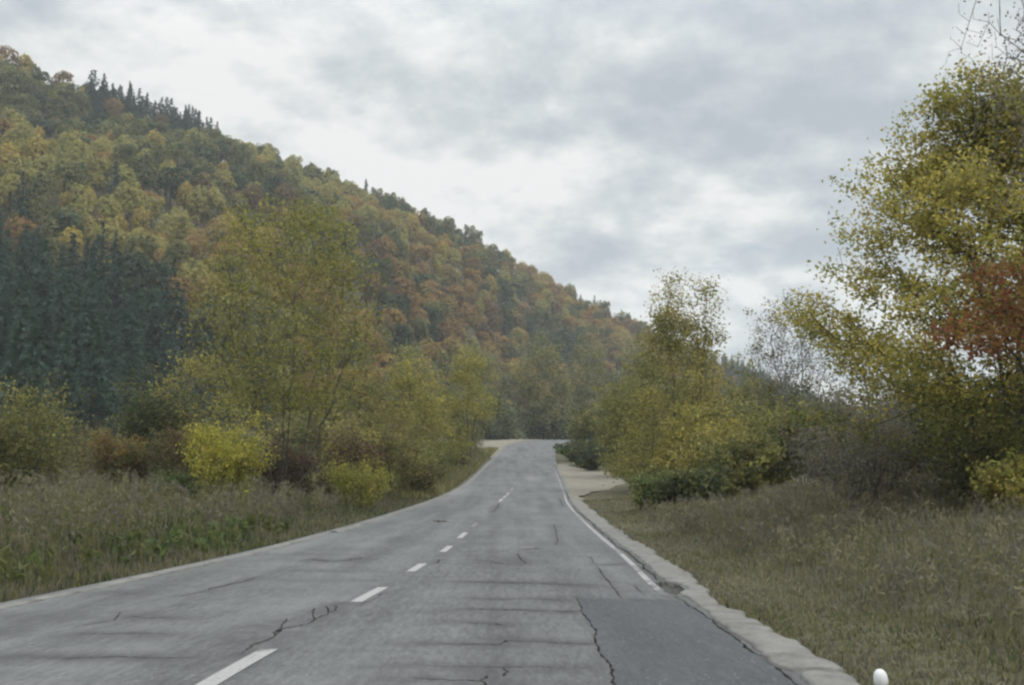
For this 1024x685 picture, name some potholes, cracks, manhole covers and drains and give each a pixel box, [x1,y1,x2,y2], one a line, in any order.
crack [239,604,339,655]
pothole [655,582,684,595]
crack [464,582,616,685]
